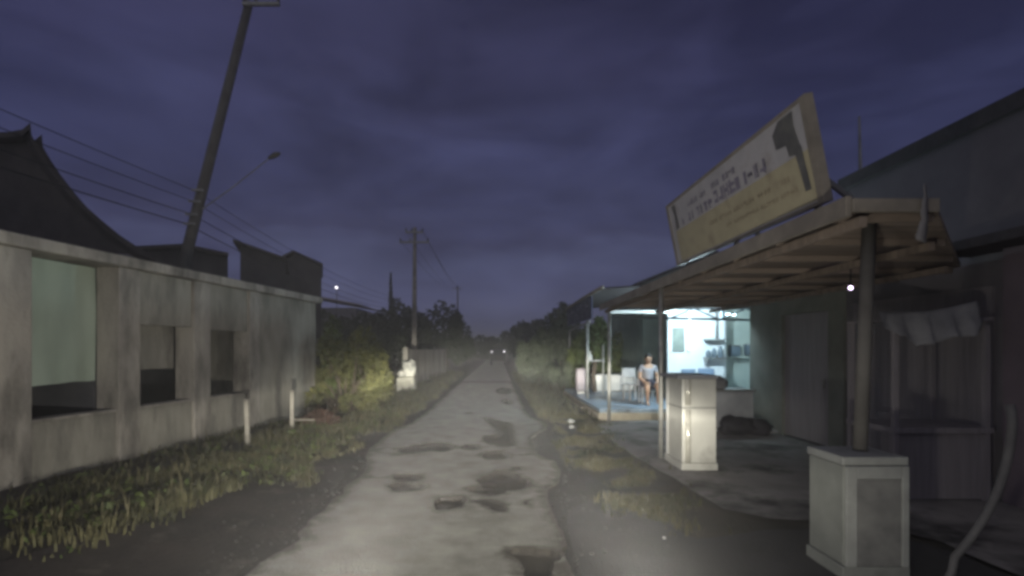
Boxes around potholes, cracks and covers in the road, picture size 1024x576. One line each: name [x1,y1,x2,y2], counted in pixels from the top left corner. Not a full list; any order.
pothole [505,547,561,576]
pothole [482,451,510,459]
pothole [434,496,468,510]
pothole [387,483,428,492]
pothole [483,418,516,447]
pothole [394,443,455,453]
pothole [472,499,506,512]
pothole [466,471,529,495]
